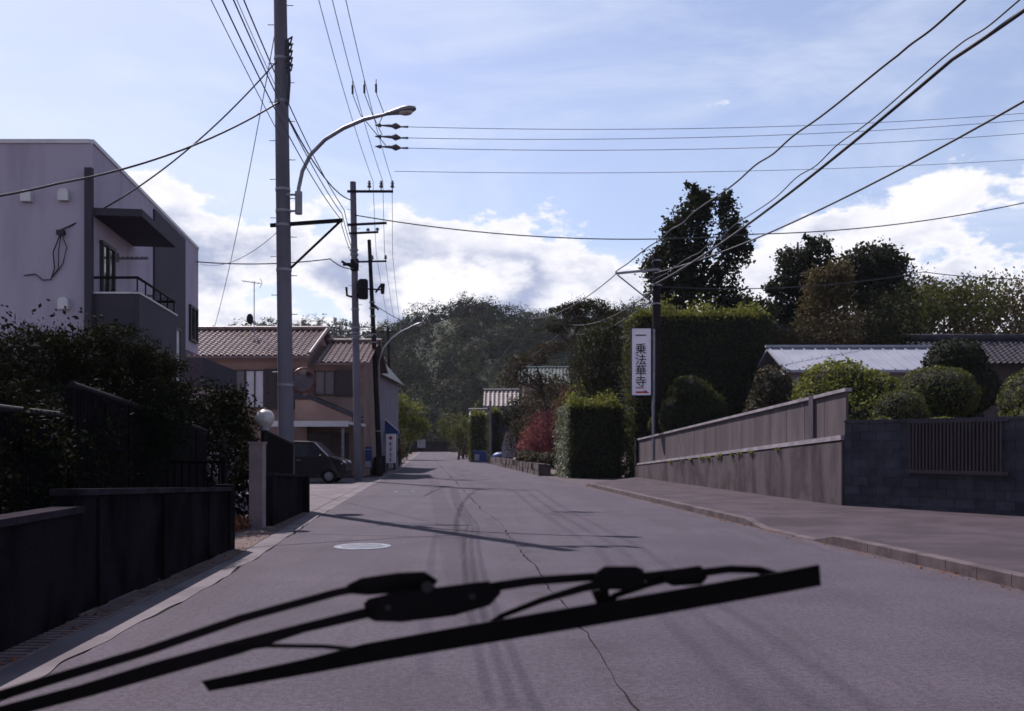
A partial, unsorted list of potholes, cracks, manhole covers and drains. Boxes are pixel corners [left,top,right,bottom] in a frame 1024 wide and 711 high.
crack [433,457,640,711]
